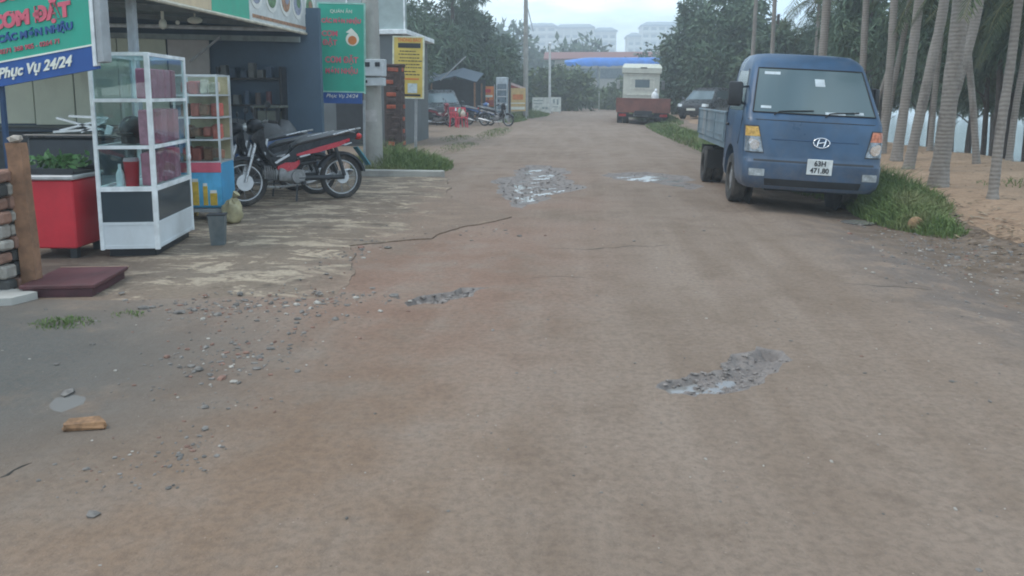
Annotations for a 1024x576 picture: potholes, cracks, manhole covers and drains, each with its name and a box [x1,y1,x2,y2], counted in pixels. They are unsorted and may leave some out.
pothole [491,165,587,208]
pothole [655,346,793,397]
pothole [602,172,705,190]
pothole [405,287,484,306]
